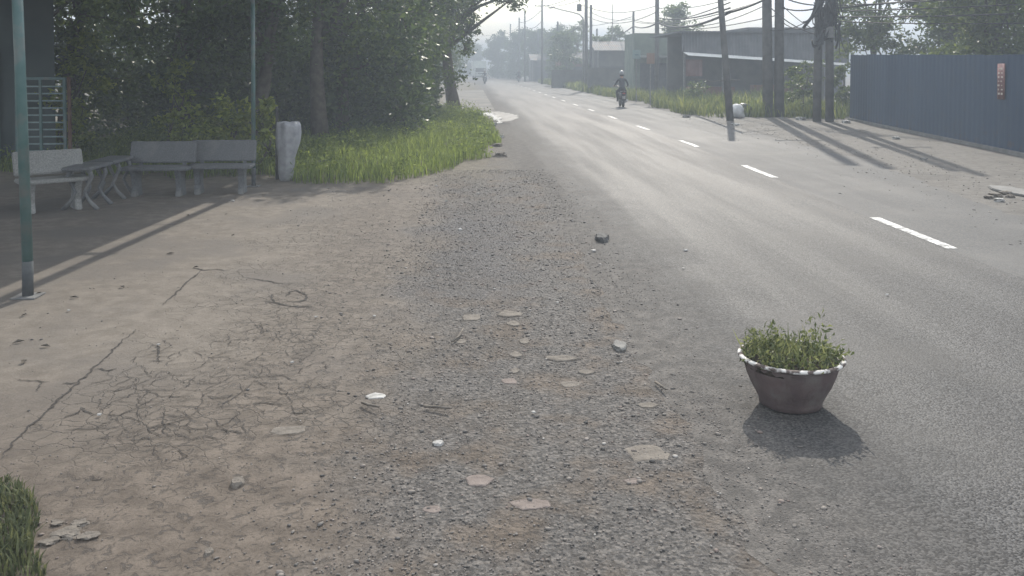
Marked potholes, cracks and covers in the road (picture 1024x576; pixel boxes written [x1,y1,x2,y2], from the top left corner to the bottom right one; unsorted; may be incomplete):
crack [2,267,328,463]
